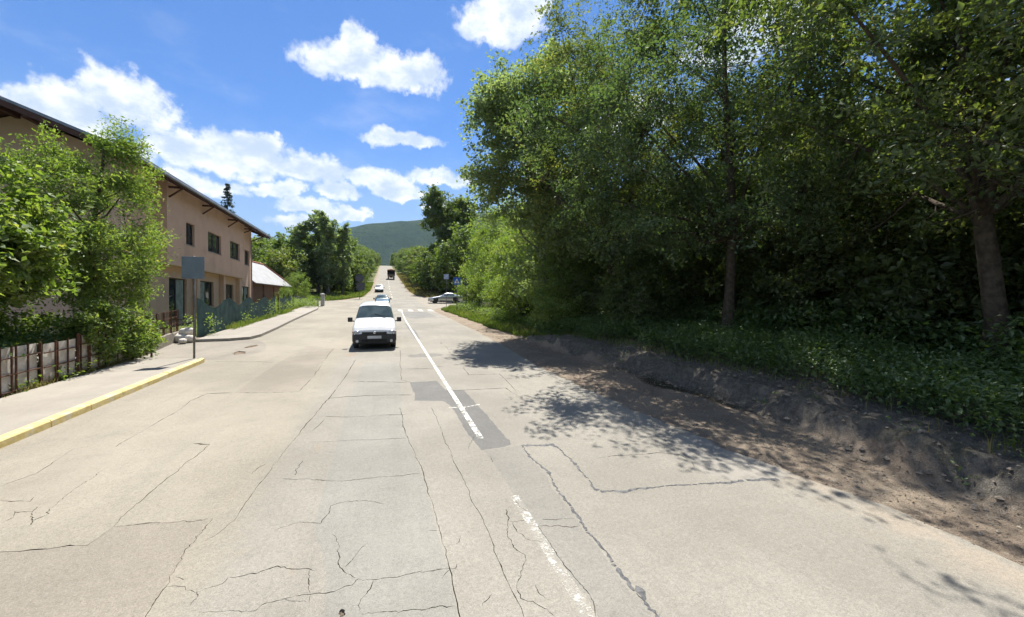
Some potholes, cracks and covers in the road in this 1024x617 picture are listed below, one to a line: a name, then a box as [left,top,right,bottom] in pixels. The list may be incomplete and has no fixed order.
crack [3,409,460,617]
crack [433,411,596,616]
